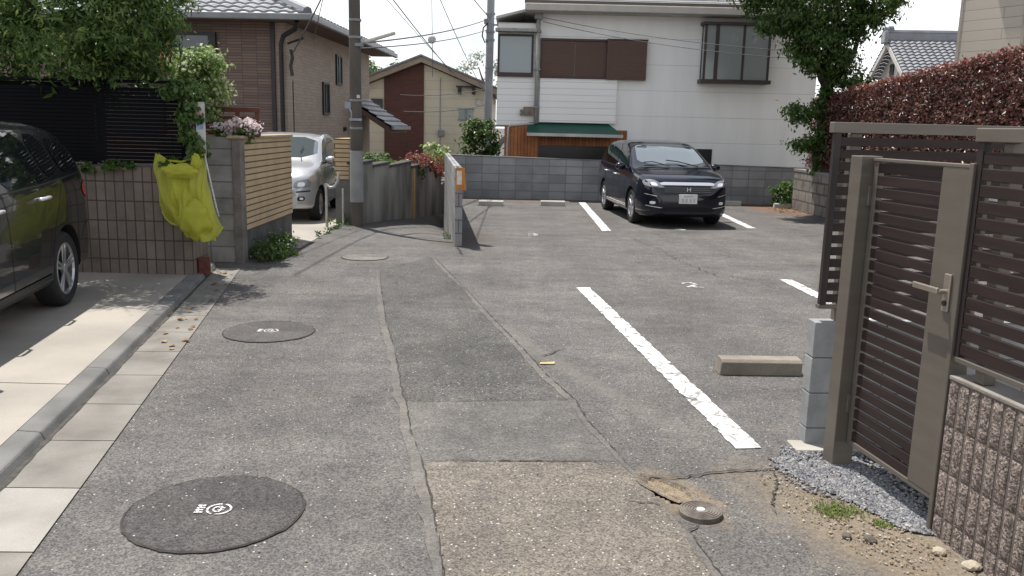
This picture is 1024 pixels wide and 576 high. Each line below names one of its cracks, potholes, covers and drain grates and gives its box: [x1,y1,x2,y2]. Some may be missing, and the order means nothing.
manhole cover [222,321,316,342]
manhole cover [341,253,389,261]
manhole cover [120,475,306,553]
crack [643,468,780,512]
pothole [636,472,702,503]
